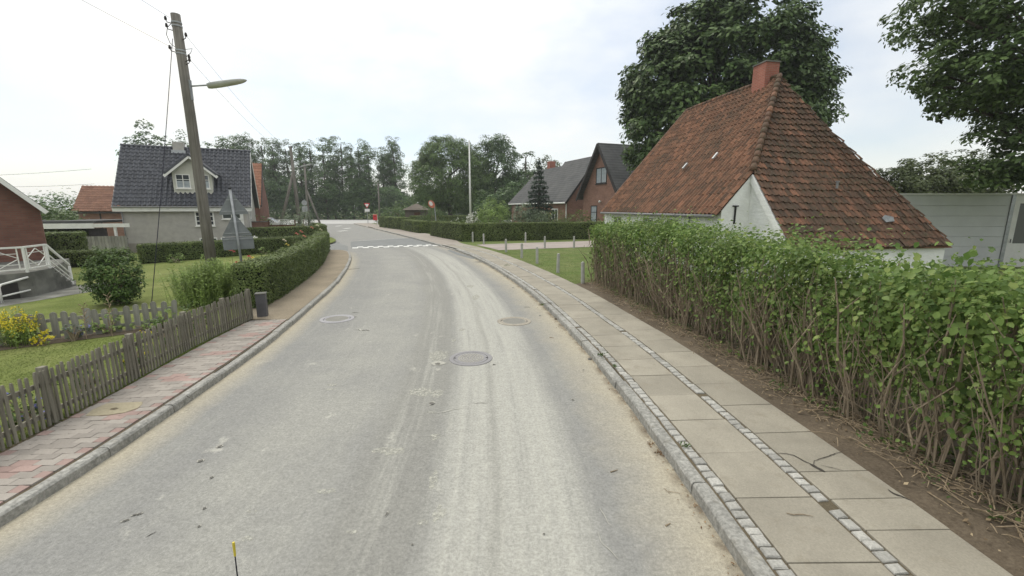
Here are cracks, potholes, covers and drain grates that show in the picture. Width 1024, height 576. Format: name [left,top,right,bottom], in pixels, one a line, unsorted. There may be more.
manhole cover [319,315,354,323]
manhole cover [449,351,492,366]
manhole cover [497,317,531,326]
crack [783,451,842,472]
manhole cover [85,402,142,416]
